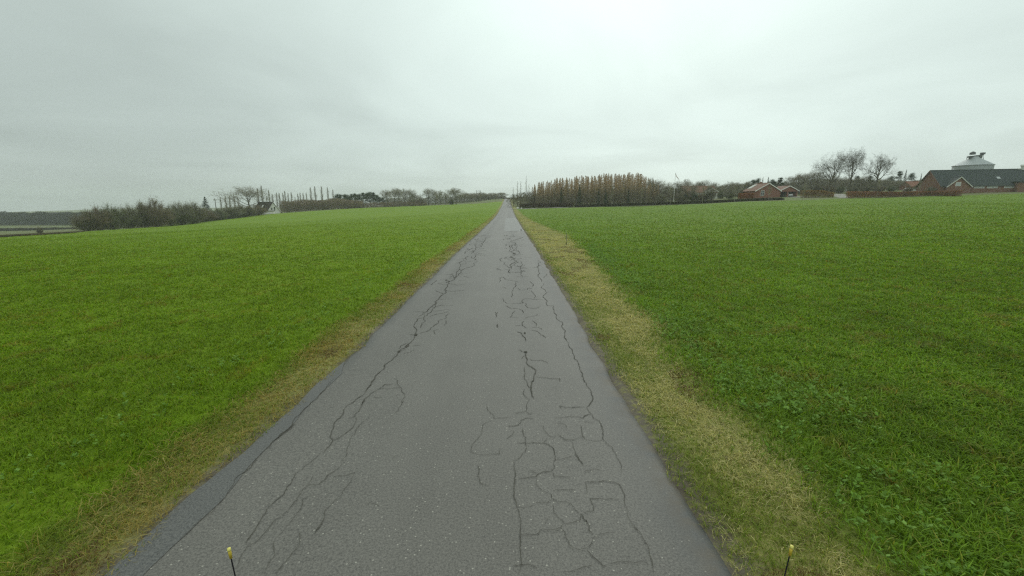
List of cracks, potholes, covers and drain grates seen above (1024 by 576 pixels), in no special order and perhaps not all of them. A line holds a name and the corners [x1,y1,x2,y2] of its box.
crack [236,230,654,572]
